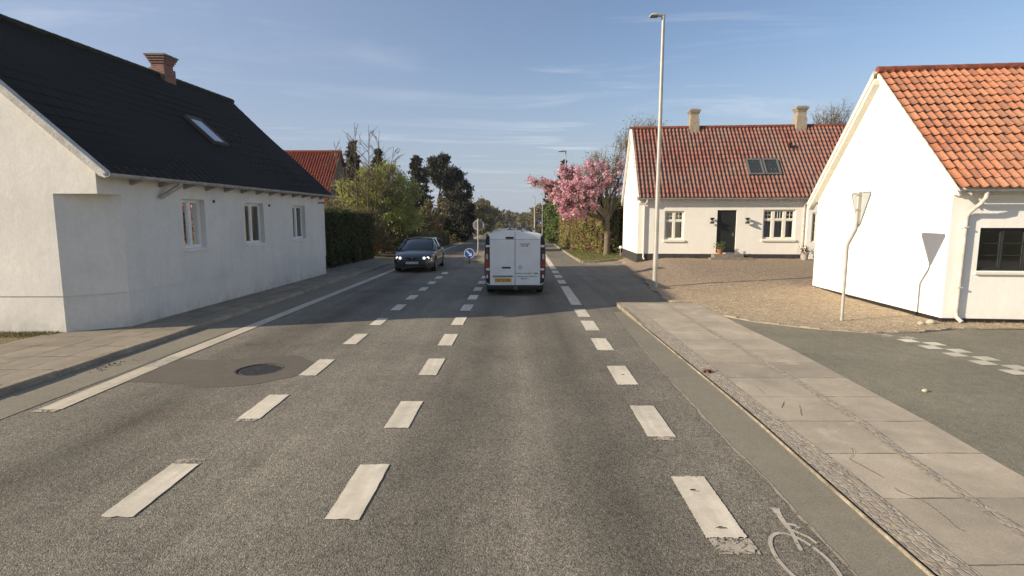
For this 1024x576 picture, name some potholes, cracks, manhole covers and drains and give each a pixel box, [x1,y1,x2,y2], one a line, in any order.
manhole cover [234,363,284,376]
crack [849,447,966,532]
